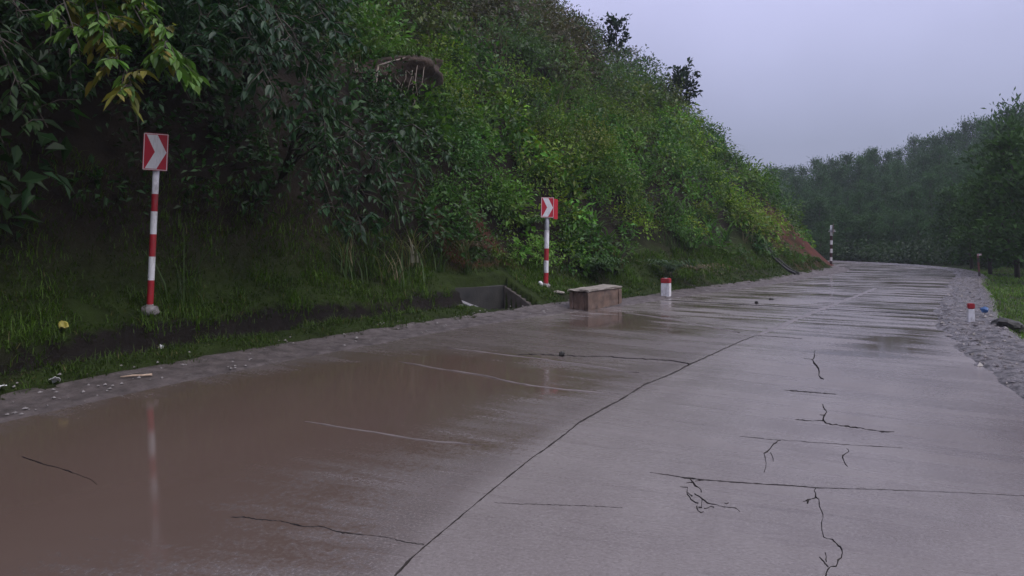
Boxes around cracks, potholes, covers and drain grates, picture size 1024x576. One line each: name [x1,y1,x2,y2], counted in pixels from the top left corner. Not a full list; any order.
crack [22,456,97,485]
crack [233,335,1024,576]
